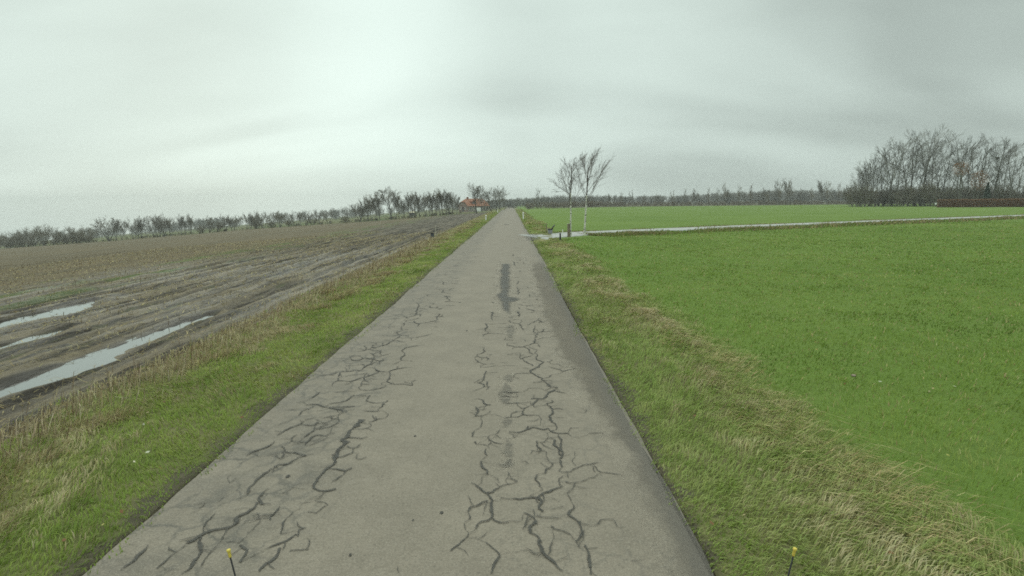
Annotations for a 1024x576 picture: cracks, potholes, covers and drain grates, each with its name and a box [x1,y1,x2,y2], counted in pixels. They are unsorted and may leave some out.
crack [121,270,460,574]
crack [450,254,625,576]
